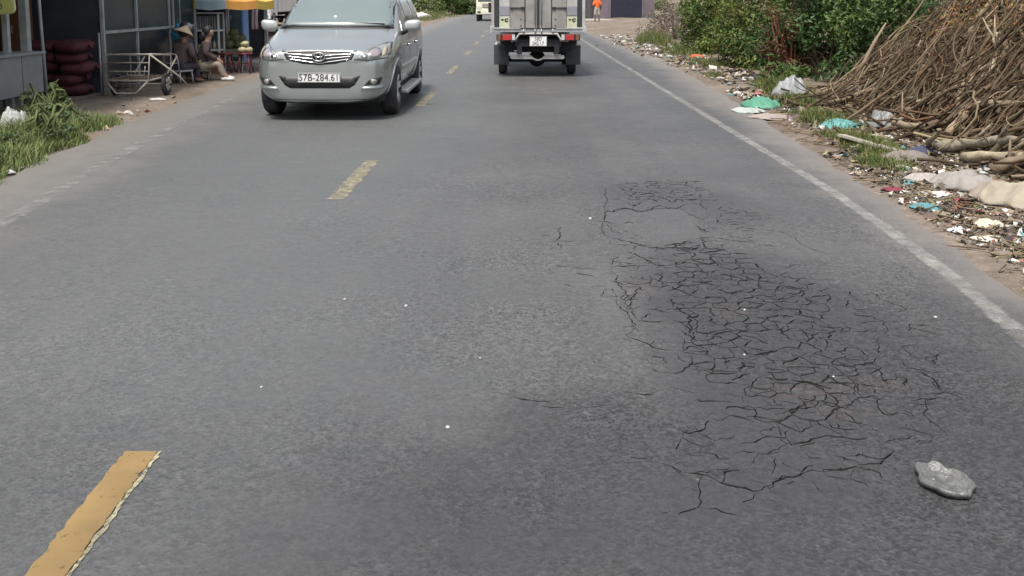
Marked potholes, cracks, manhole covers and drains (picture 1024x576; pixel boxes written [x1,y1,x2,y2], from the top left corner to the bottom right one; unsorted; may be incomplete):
crack [498,392,606,408]
